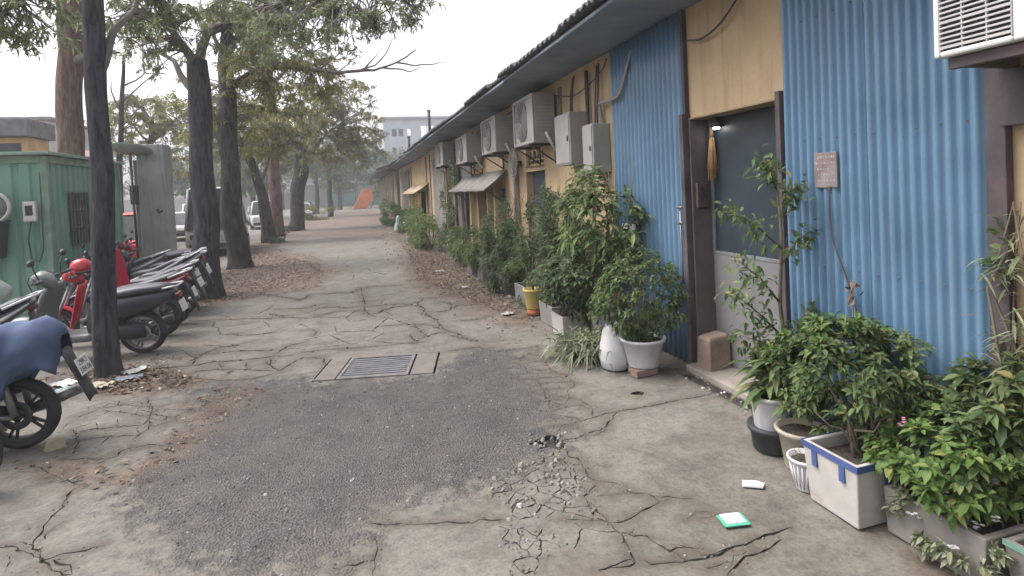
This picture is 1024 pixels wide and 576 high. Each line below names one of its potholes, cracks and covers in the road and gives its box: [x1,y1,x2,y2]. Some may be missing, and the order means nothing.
crack [155,246,508,380]
crack [0,396,176,576]
pothole [529,435,566,450]
drain grate [314,353,439,382]
crack [333,347,792,576]
